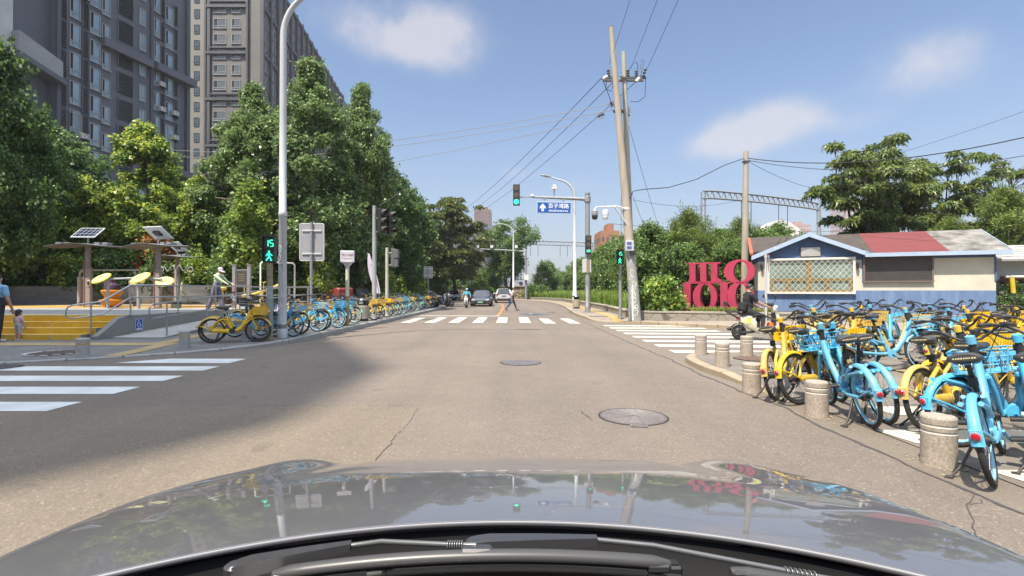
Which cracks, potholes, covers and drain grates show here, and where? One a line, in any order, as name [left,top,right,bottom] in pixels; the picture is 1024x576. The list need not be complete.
manhole cover [598,408,669,428]
crack [966,494,986,536]
